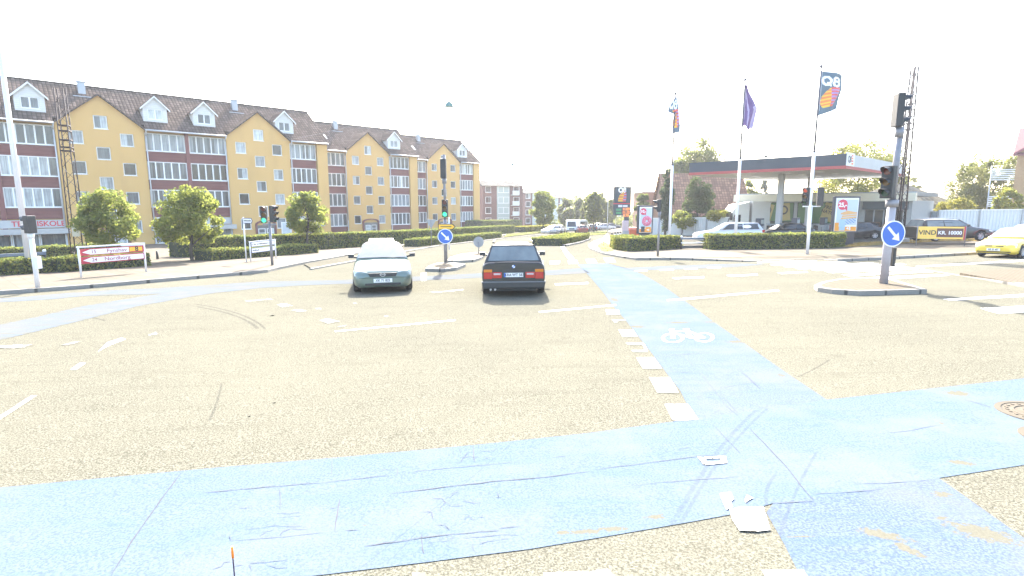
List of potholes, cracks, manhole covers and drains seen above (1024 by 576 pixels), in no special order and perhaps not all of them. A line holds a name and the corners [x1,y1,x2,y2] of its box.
manhole cover [994,401,1024,420]
crack [214,447,713,570]
